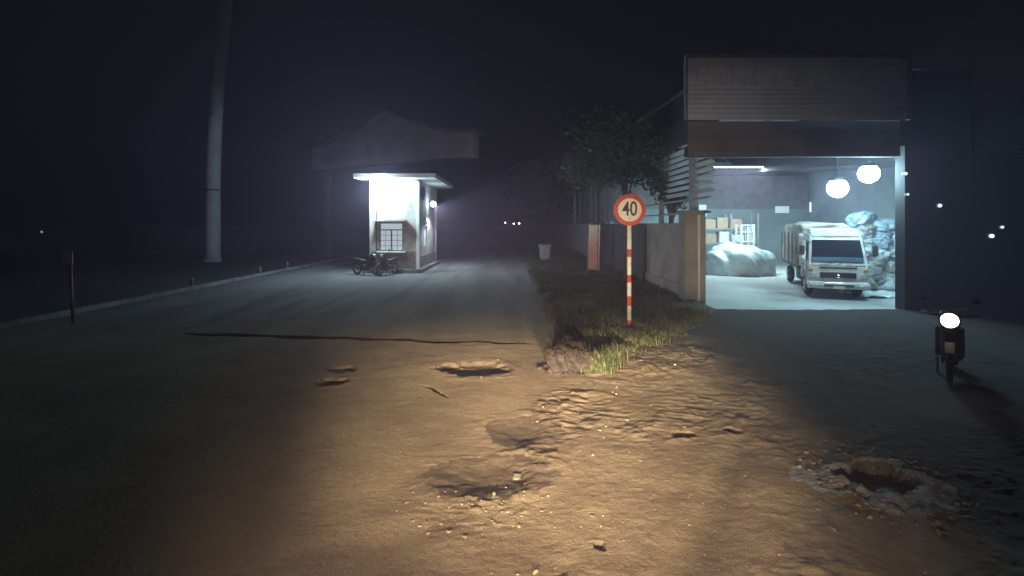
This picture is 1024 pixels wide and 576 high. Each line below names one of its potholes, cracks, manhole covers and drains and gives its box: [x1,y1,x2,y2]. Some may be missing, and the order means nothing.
pothole [788,457,961,521]
pothole [313,377,352,387]
crack [185,333,528,344]
pothole [672,430,697,438]
pothole [484,415,568,450]
pothole [324,364,359,374]
pothole [421,453,563,500]
pothole [434,360,515,377]
